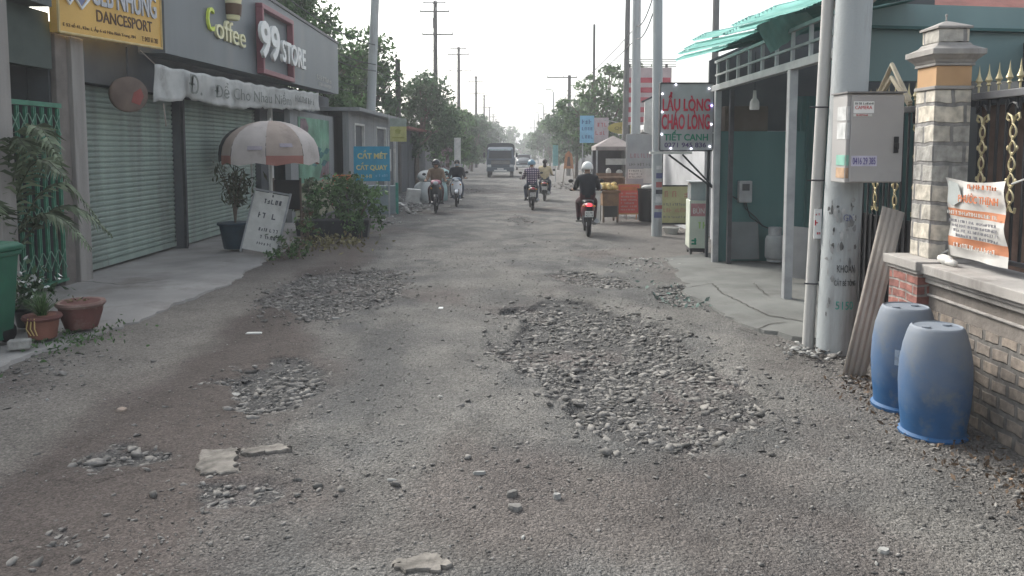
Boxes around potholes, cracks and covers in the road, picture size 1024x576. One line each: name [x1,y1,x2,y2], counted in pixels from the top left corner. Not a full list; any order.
pothole [48,433,190,484]
pothole [464,293,824,466]
pothole [244,266,432,327]
pothole [162,352,364,433]
pothole [641,283,709,312]
pothole [534,268,647,292]
